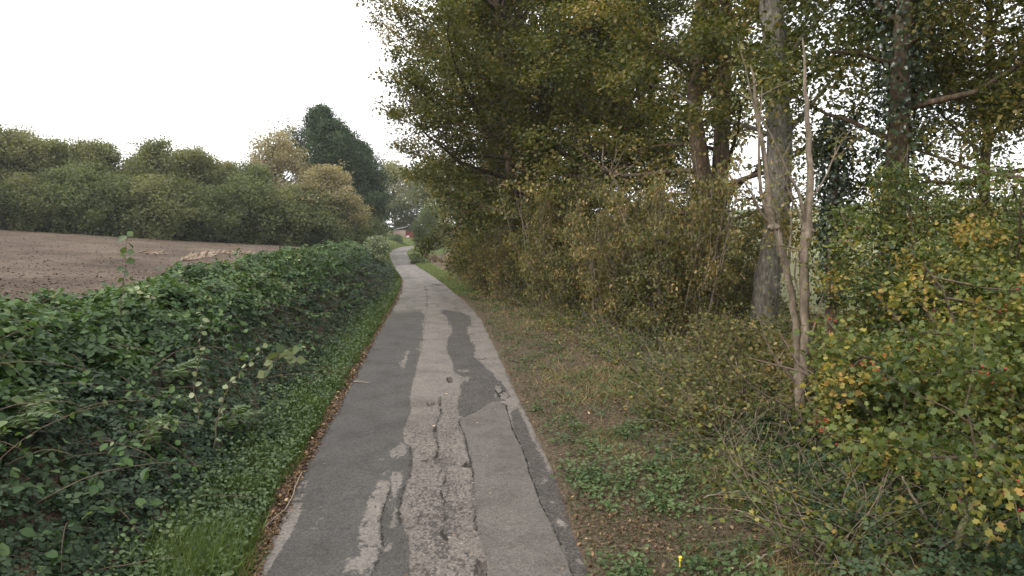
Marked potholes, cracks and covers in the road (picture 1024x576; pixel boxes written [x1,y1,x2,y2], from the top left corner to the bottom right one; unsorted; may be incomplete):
crack [374,390,573,574]
